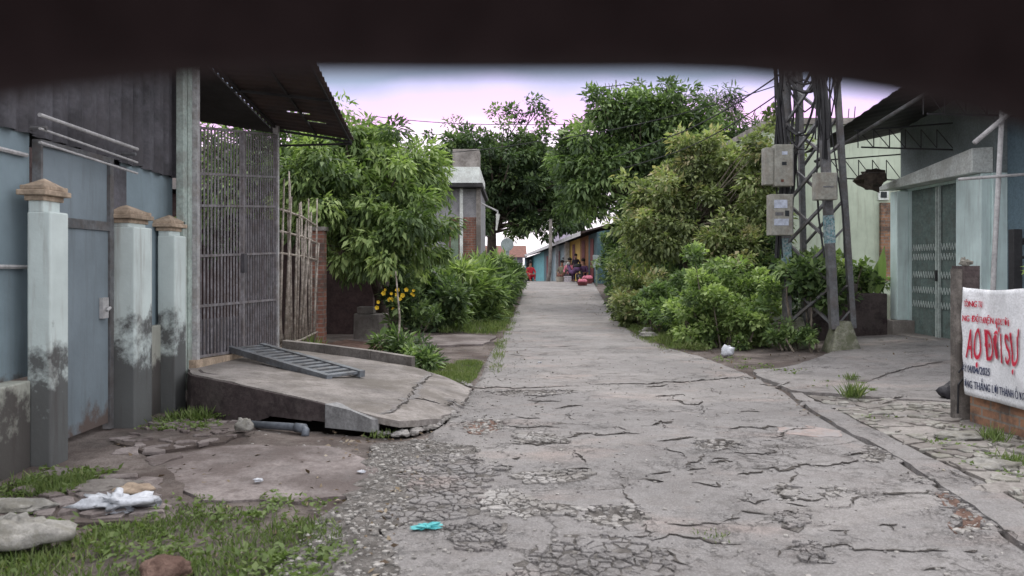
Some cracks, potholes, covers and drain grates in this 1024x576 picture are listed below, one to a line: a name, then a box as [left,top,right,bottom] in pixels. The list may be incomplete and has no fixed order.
crack [365,361,1024,576]
pothole [457,418,509,436]
